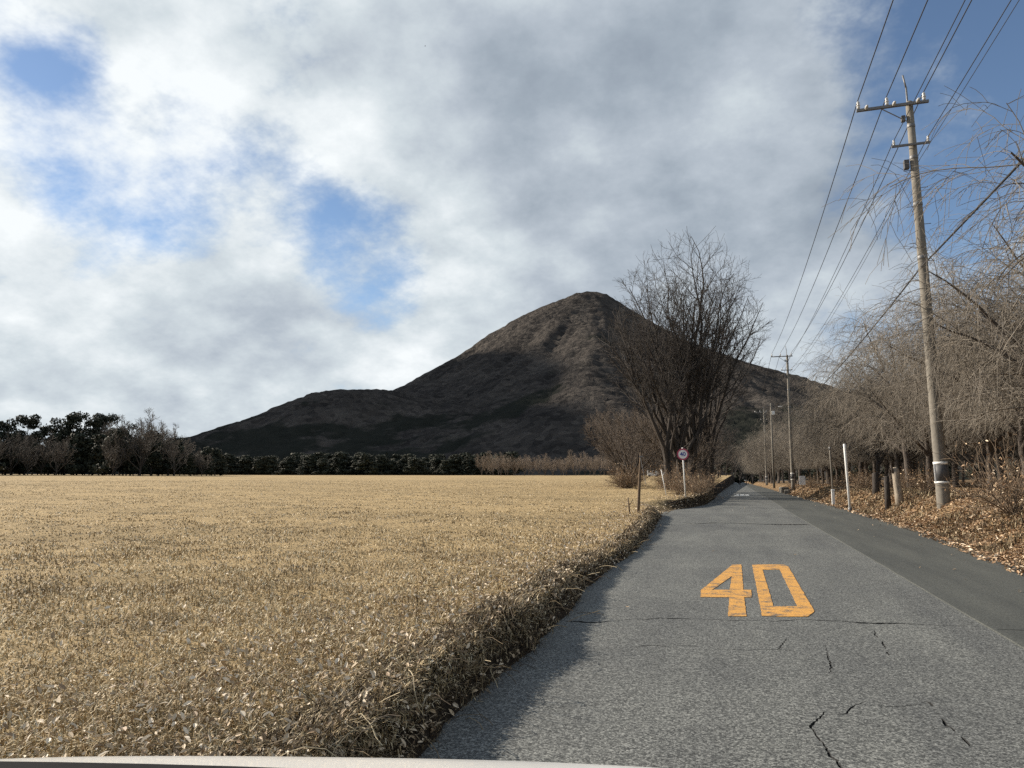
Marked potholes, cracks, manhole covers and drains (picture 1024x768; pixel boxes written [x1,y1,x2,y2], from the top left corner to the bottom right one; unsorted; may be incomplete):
crack [791,701,866,768]
crack [566,618,948,655]
crack [887,701,970,746]
